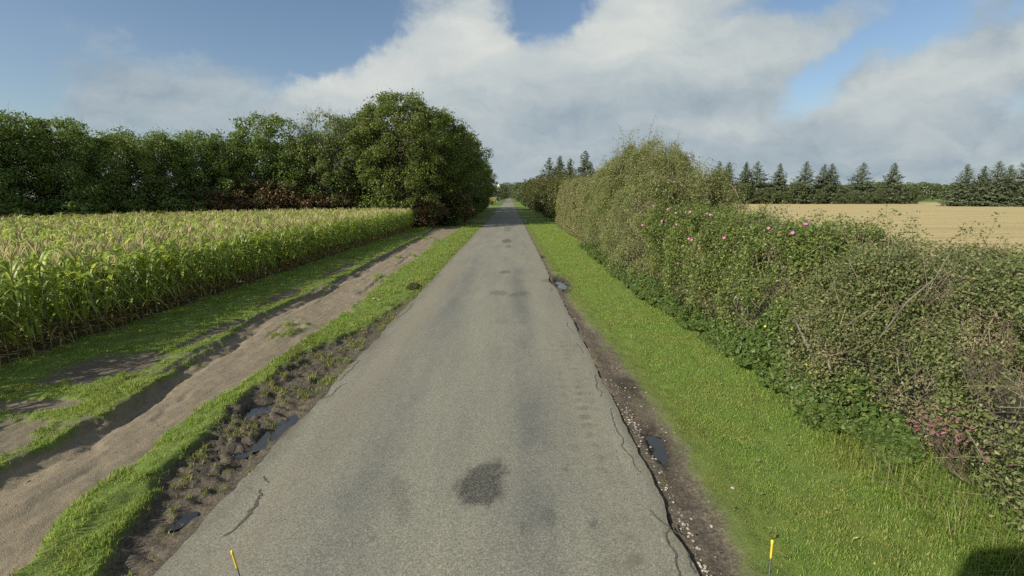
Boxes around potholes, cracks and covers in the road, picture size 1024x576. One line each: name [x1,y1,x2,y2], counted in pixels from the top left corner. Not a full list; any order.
crack [223,476,269,536]
crack [650,510,696,576]
crack [594,374,641,472]
